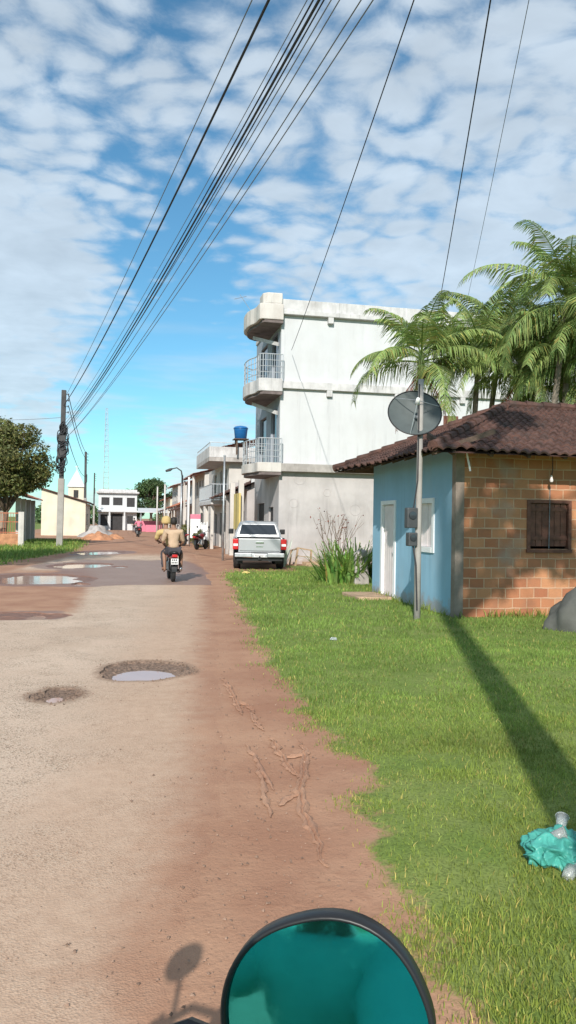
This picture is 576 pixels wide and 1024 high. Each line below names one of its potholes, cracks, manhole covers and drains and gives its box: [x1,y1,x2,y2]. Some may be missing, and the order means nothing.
pothole [97,659,198,682]
pothole [23,685,94,706]
pothole [0,612,73,620]
crack [221,678,329,867]
